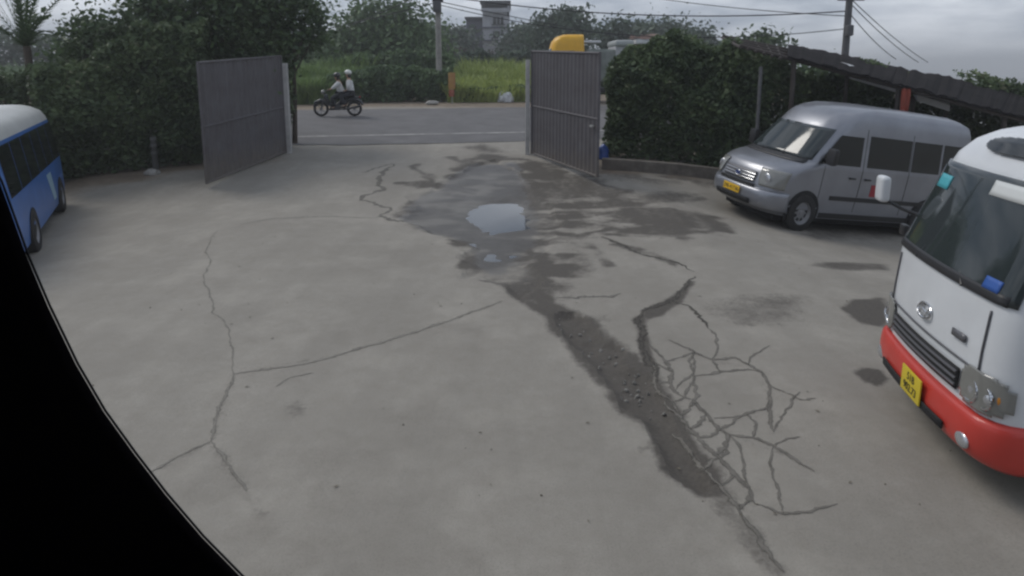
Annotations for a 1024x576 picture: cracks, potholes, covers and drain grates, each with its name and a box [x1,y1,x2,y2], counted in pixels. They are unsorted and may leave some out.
crack [152,230,501,491]
crack [240,164,403,225]
crack [556,236,835,573]
